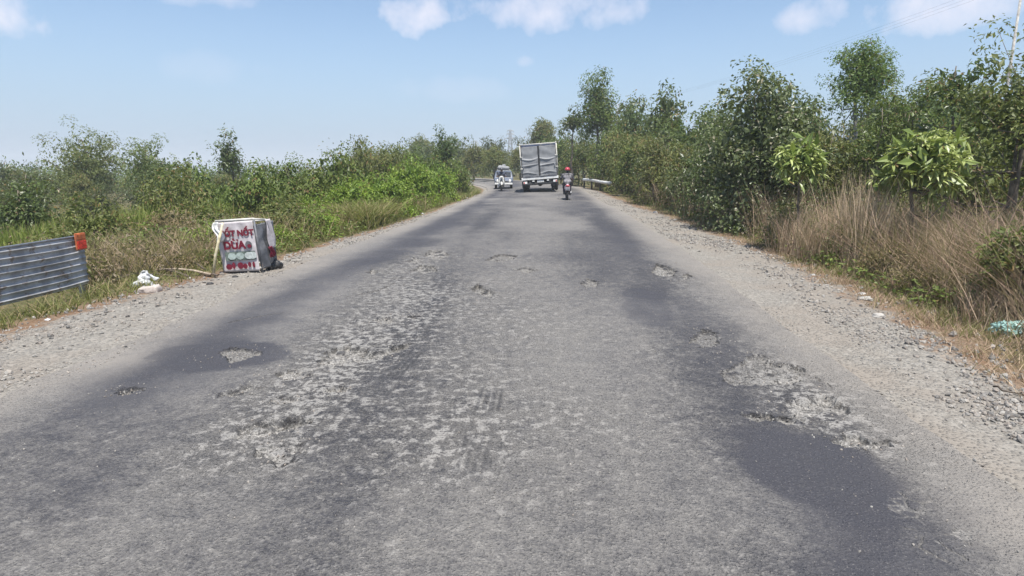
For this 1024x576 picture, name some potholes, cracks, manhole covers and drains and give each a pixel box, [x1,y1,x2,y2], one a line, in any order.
pothole [829,435,903,450]
pothole [578,279,600,288]
pothole [423,250,449,260]
pothole [469,283,498,298]
pothole [486,254,518,262]
pothole [217,347,264,364]
pothole [689,329,722,348]
pothole [716,351,806,387]
pothole [650,263,678,276]
pothole [740,412,796,425]
pothole [778,393,853,422]
pothole [110,385,146,395]
